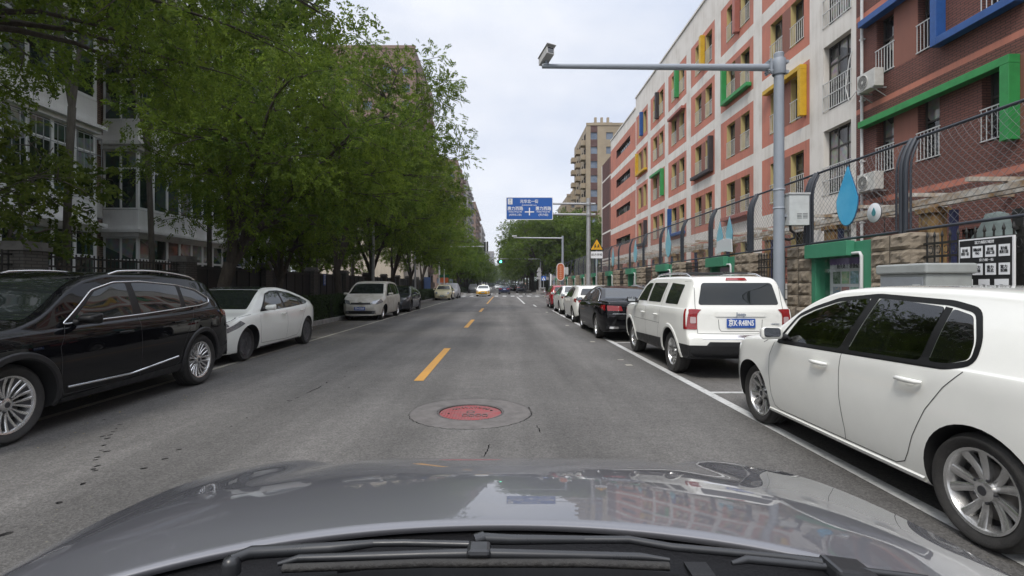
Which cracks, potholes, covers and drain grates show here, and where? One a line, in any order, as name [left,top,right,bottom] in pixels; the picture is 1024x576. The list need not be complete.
manhole cover [410,399,530,429]
crack [409,407,540,456]
